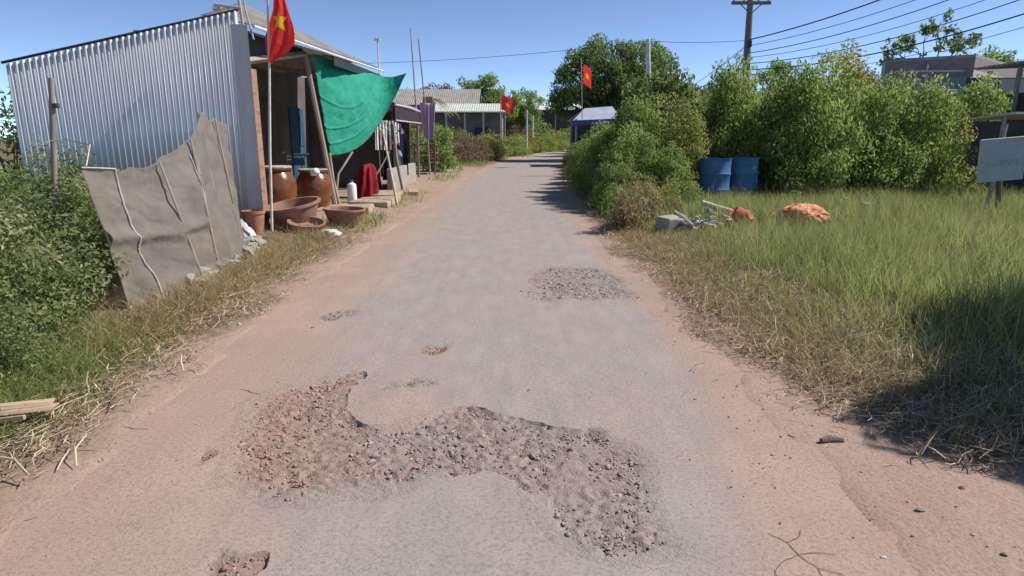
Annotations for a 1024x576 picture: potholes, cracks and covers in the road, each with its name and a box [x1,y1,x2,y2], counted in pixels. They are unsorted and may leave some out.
pothole [197,548,270,576]
pothole [516,265,639,304]
pothole [207,370,695,569]
pothole [313,309,363,321]
pothole [414,341,456,356]
